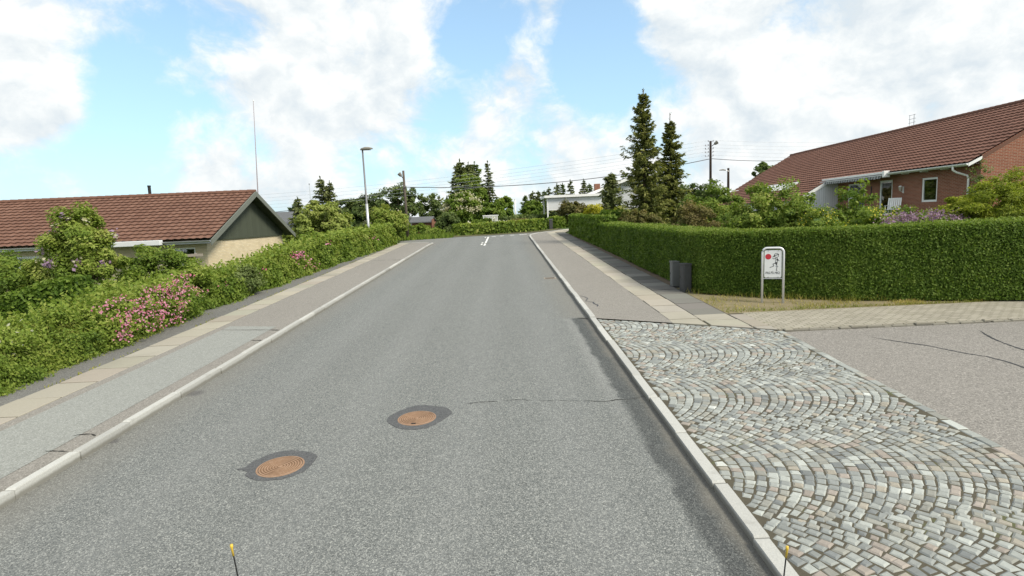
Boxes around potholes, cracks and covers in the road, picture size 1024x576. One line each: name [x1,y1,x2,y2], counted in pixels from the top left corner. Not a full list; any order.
manhole cover [387,405,452,430]
manhole cover [237,450,318,481]
